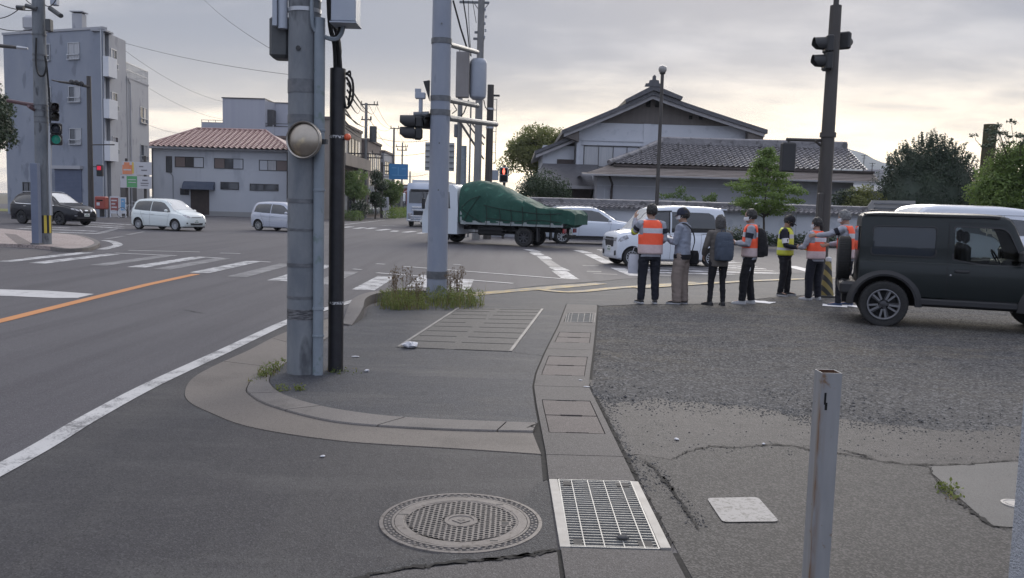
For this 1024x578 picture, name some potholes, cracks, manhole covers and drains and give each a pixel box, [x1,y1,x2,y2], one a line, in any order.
drain grate [549,479,671,551]
crack [595,398,1011,548]
crack [355,548,557,578]
drain grate [565,313,596,323]
manhole cover [379,493,542,554]
